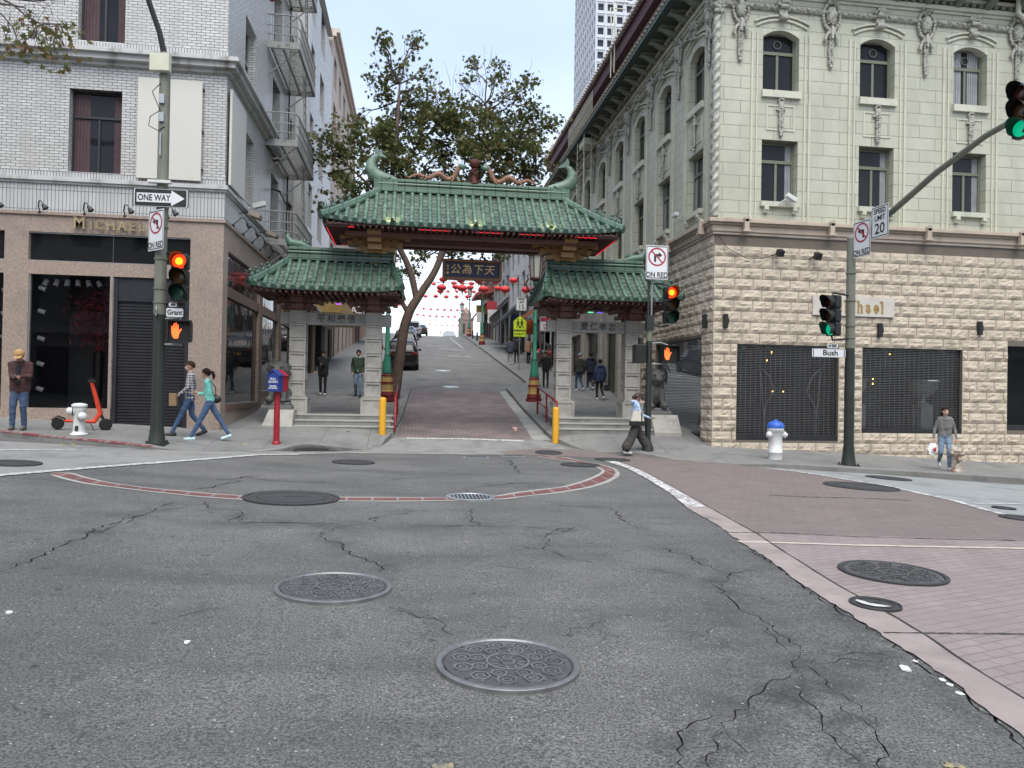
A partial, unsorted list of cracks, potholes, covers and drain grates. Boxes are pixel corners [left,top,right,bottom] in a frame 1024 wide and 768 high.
crack [742,544,1024,749]
manhole cover [837,560,951,587]
manhole cover [273,572,392,605]
manhole cover [823,481,901,492]
manhole cover [242,490,340,506]
crack [643,568,898,768]
crack [362,509,608,566]
manhole cover [849,596,903,612]
crack [6,503,187,570]
manhole cover [435,638,580,695]
crack [189,475,422,574]
